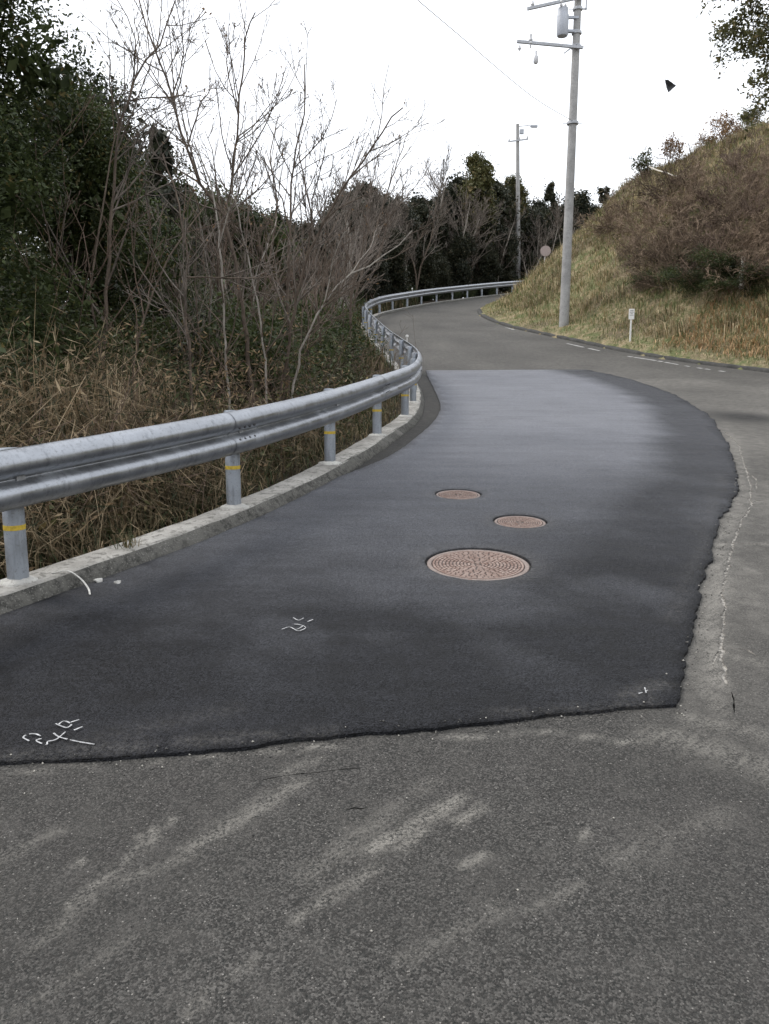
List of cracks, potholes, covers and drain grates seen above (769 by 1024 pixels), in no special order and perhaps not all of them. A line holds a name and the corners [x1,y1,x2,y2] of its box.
manhole cover [427,550,529,580]
manhole cover [494,516,546,528]
crack [712,432,769,712]
crack [264,768,357,780]
manhole cover [436,490,480,499]
